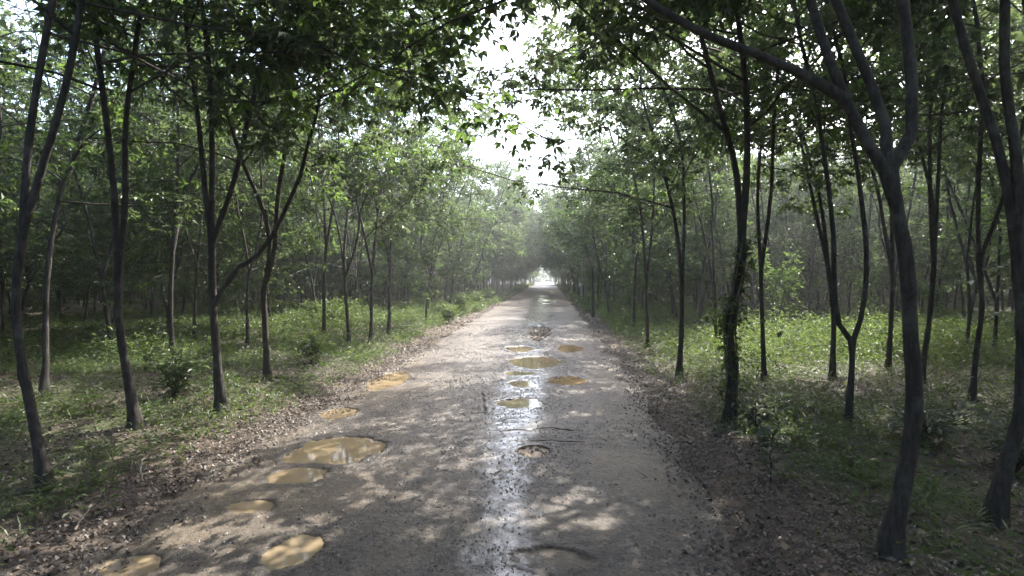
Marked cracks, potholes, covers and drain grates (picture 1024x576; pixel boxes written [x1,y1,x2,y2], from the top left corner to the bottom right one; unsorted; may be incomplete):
pothole [216,495,287,518]
pothole [553,344,588,353]
pothole [361,370,414,392]
pothole [255,462,339,489]
pothole [502,345,538,353]
pothole [526,324,553,342]
pothole [81,546,177,576]
pothole [245,528,338,576]
